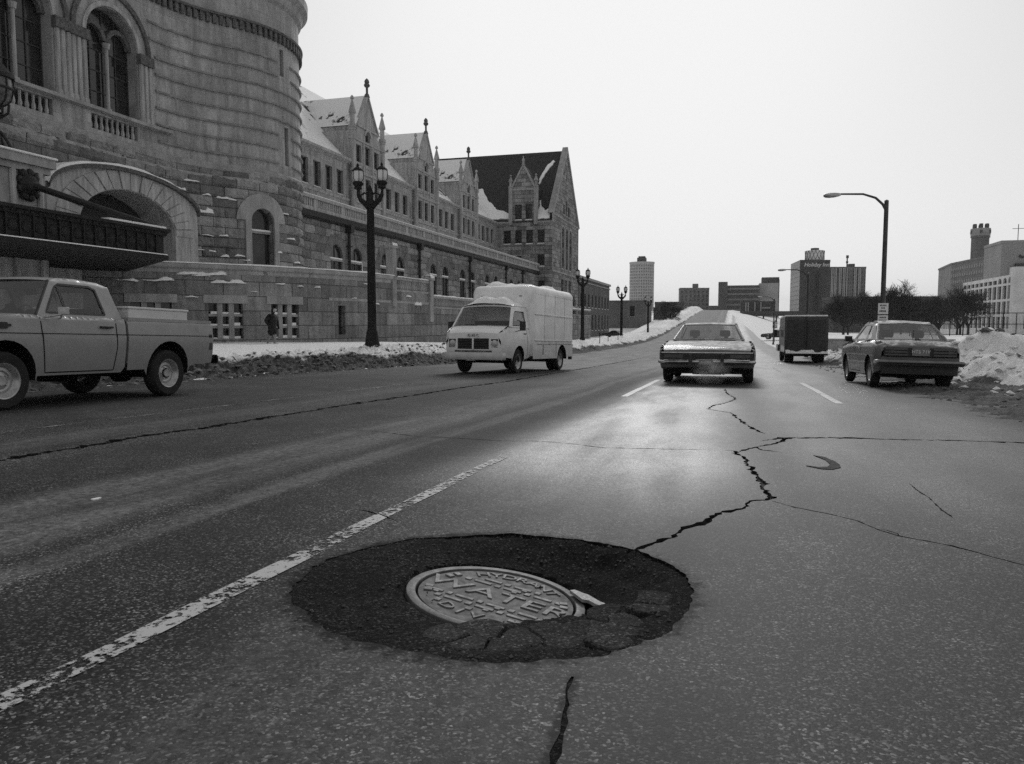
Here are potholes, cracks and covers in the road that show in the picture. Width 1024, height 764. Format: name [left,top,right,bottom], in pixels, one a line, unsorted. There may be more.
manhole cover [405,566,605,626]
pothole [289,533,694,663]
crack [549,678,574,764]
crack [335,390,1024,565]
